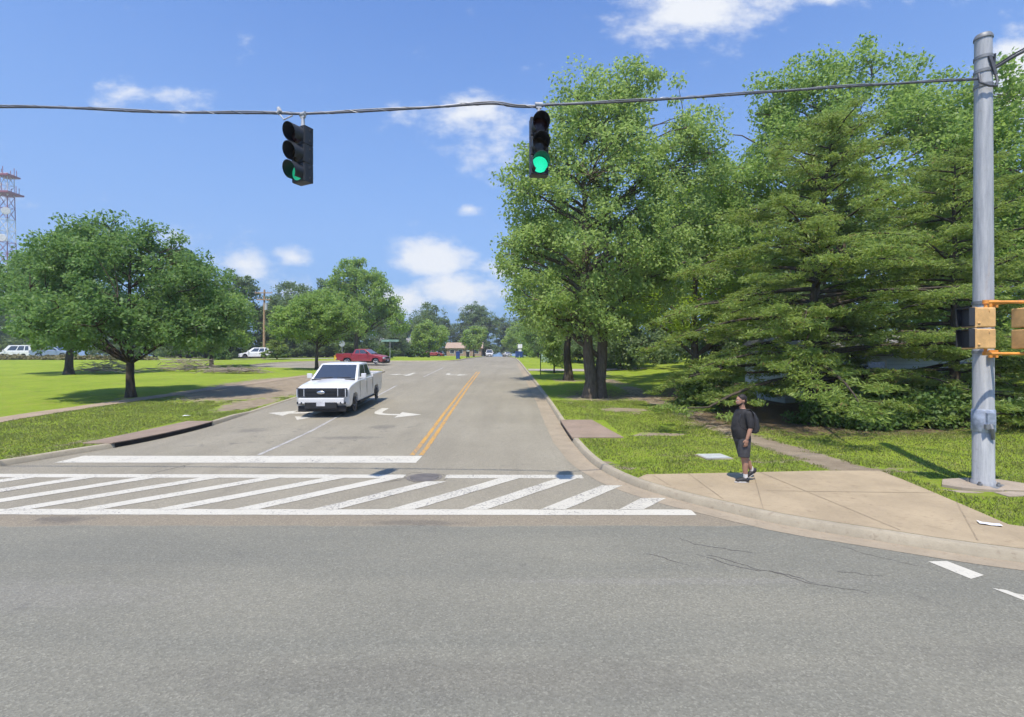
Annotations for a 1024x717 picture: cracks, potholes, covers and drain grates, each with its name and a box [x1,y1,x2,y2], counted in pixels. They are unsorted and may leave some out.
manhole cover [406,473,443,481]
crack [682,539,917,594]
